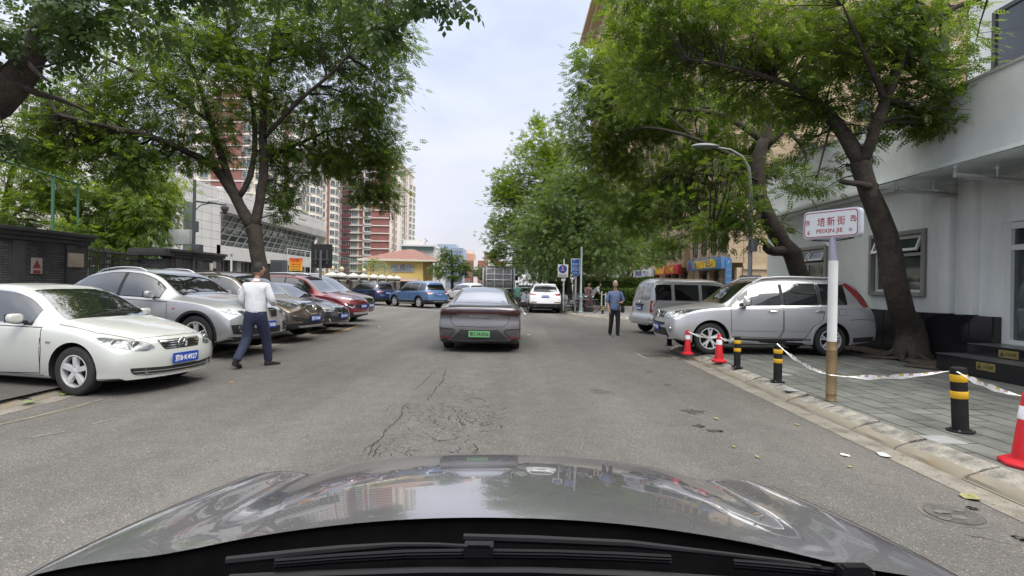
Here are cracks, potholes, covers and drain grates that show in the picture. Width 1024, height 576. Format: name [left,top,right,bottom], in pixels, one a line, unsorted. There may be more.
crack [364,370,505,458]
manhole cover [915,502,993,529]
